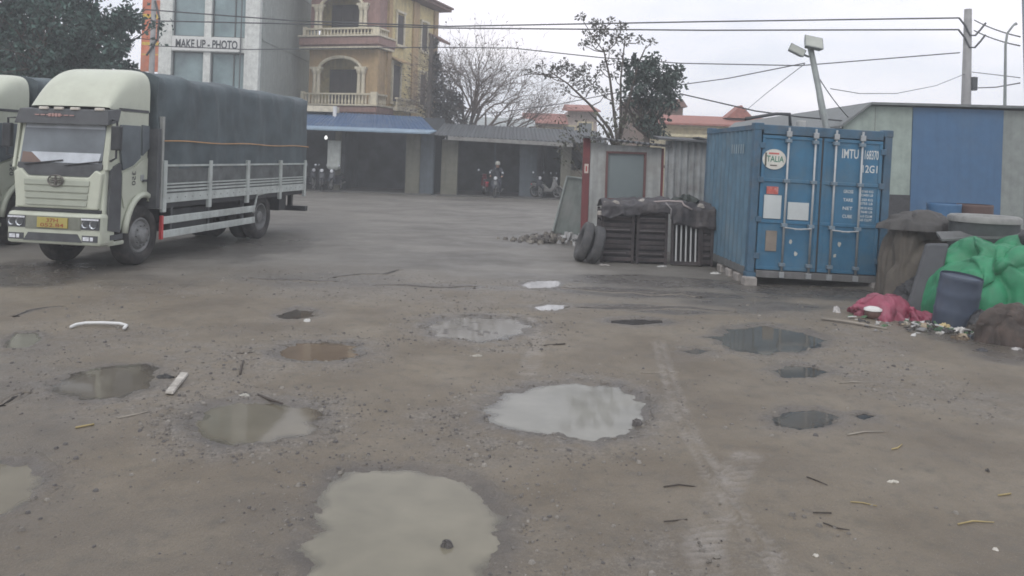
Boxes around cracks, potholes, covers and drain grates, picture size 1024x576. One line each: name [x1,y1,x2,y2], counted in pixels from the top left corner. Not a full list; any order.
pothole [480,378,658,445]
crack [246,270,472,289]
pothole [169,395,338,453]
pothole [696,321,841,359]
pothole [0,452,67,523]
pothole [601,315,673,328]
pothole [31,362,175,405]
pothole [514,279,568,289]
pothole [266,339,371,363]
pothole [757,361,842,381]
pothole [272,460,533,576]
pothole [264,305,325,321]
